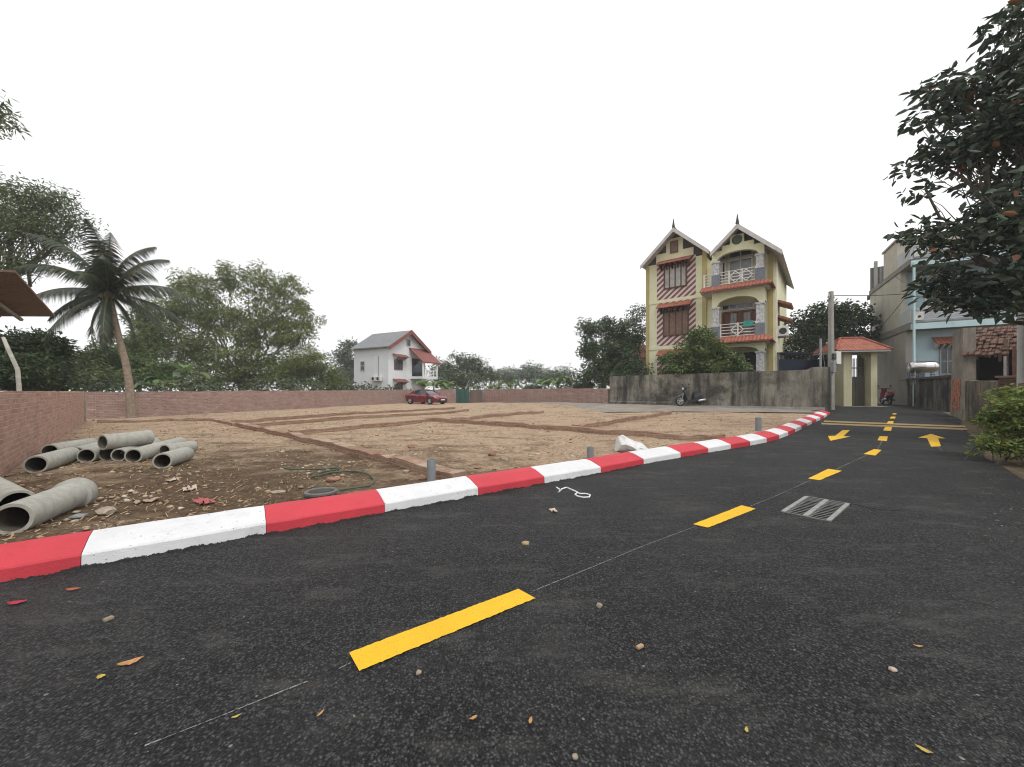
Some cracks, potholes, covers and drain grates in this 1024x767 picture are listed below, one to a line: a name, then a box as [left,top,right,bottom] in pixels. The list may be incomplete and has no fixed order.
drain grate [781,496,851,522]
